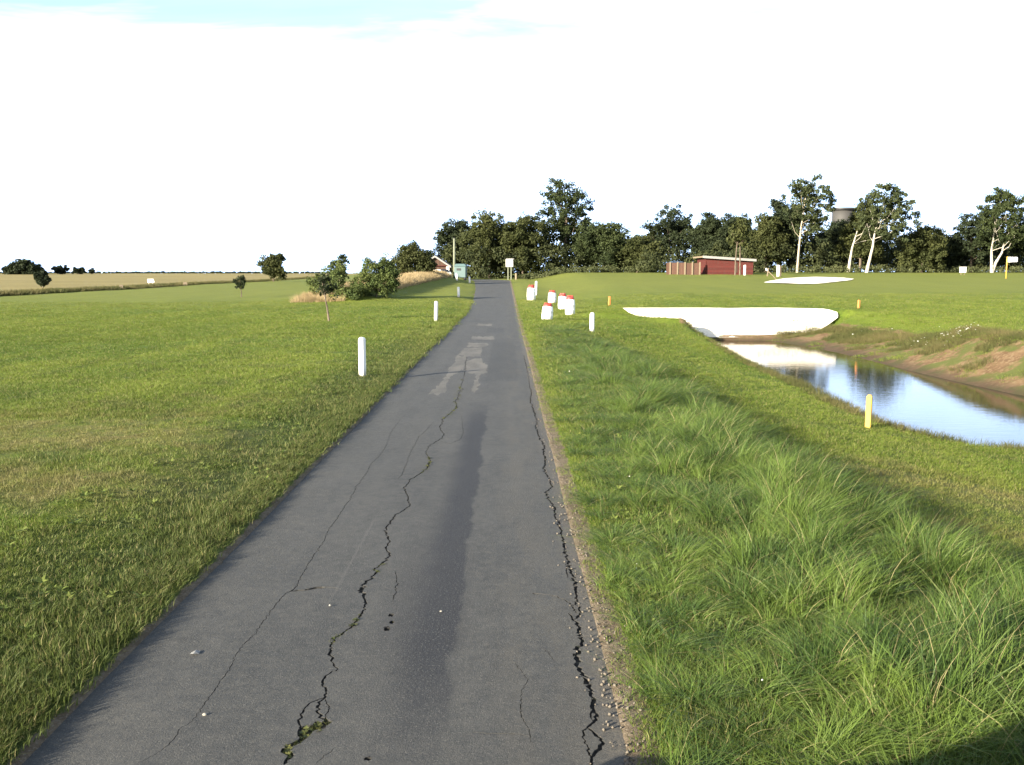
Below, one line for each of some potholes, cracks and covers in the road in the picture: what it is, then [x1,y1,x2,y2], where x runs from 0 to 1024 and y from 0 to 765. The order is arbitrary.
crack [524,357,605,765]
crack [280,359,467,765]
crack [138,420,400,763]
